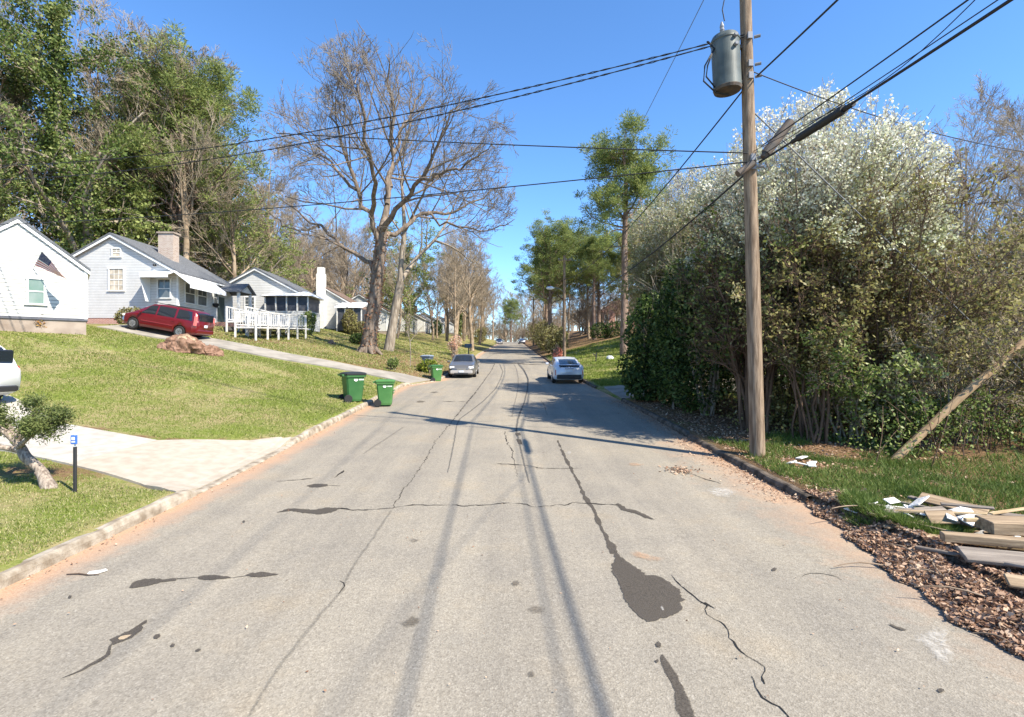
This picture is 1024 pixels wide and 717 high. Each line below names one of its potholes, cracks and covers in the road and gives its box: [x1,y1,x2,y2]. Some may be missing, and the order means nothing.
crack [340,364,614,510]
crack [673,577,789,717]
crack [62,643,113,678]
